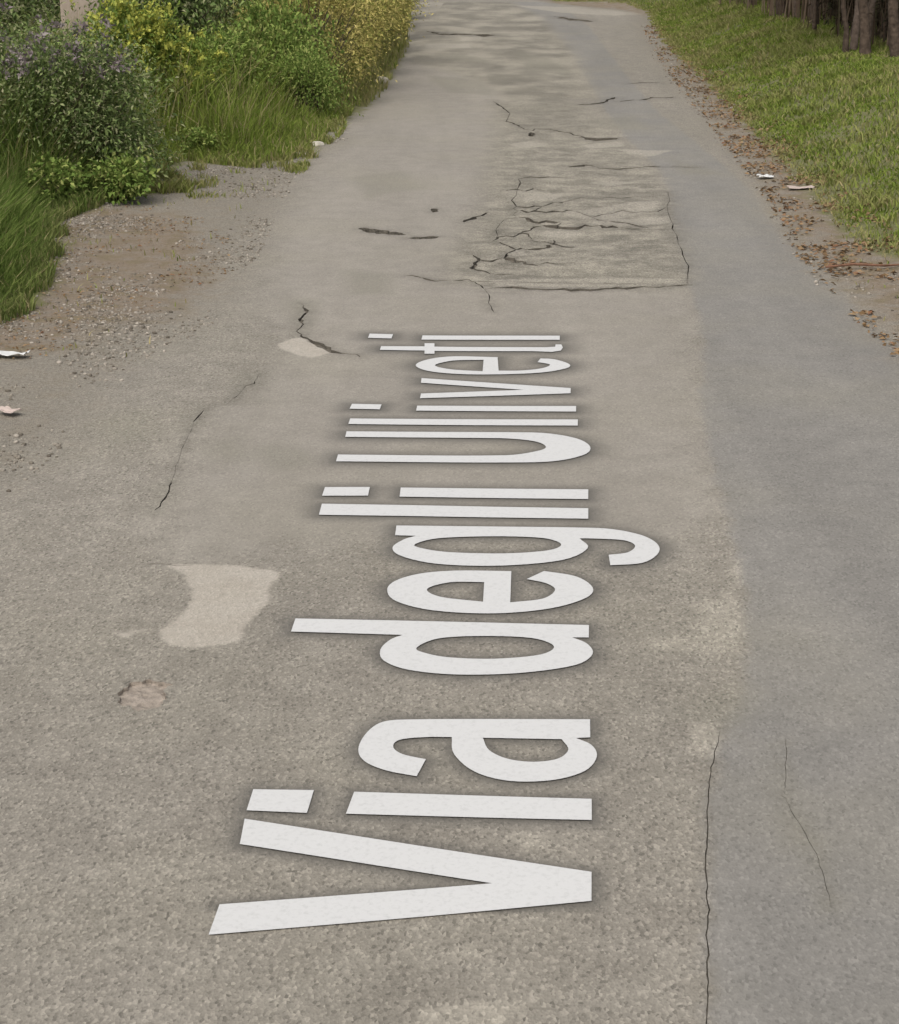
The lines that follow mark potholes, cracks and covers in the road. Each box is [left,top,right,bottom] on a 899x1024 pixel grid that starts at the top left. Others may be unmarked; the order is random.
crack [409,177,689,312]
pothole [117,679,173,711]
crack [154,376,258,511]
crack [580,82,672,105]
crack [493,101,618,141]
crack [782,744,831,904]
crack [296,306,360,357]
